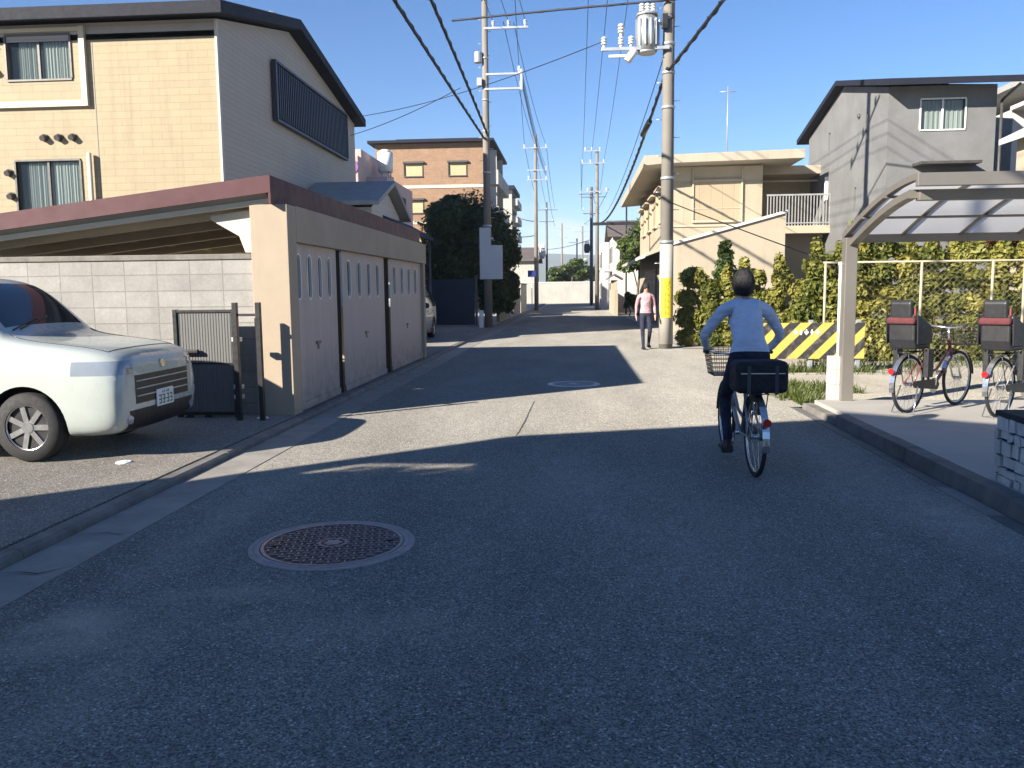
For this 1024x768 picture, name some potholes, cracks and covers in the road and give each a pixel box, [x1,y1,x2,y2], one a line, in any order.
manhole cover [248,521,415,571]
